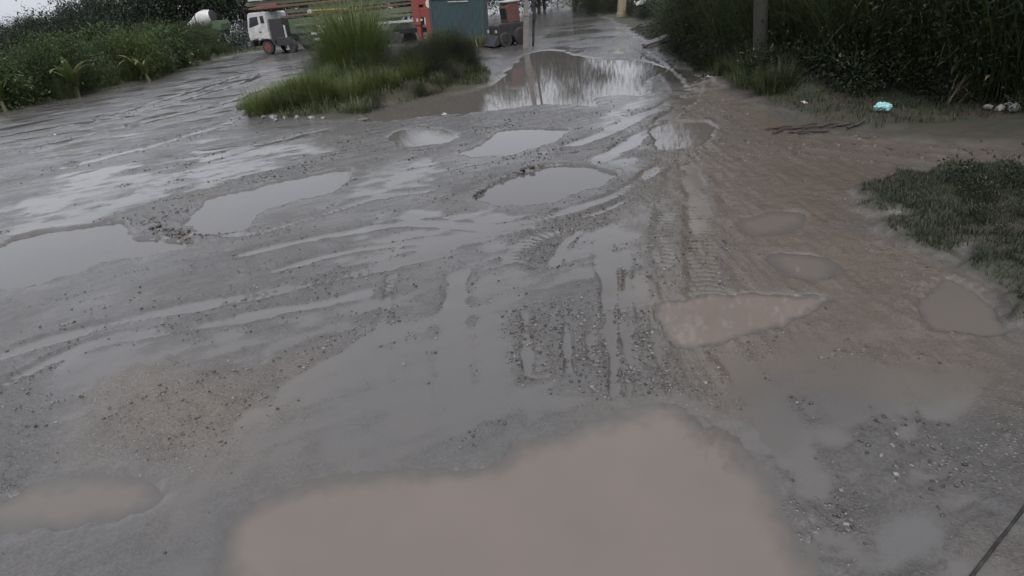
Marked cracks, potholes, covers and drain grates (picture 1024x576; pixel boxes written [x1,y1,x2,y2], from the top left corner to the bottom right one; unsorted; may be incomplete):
pothole [908,273,1018,342]
pothole [355,49,670,122]
pothole [760,247,849,286]
pothole [648,286,840,355]
pothole [0,459,186,547]
pothole [644,118,720,150]
pothole [0,217,220,291]
pothole [727,207,817,239]
pothole [468,161,623,207]
pothole [174,166,358,236]
pothole [453,126,573,158]
pothole [193,392,848,576]
